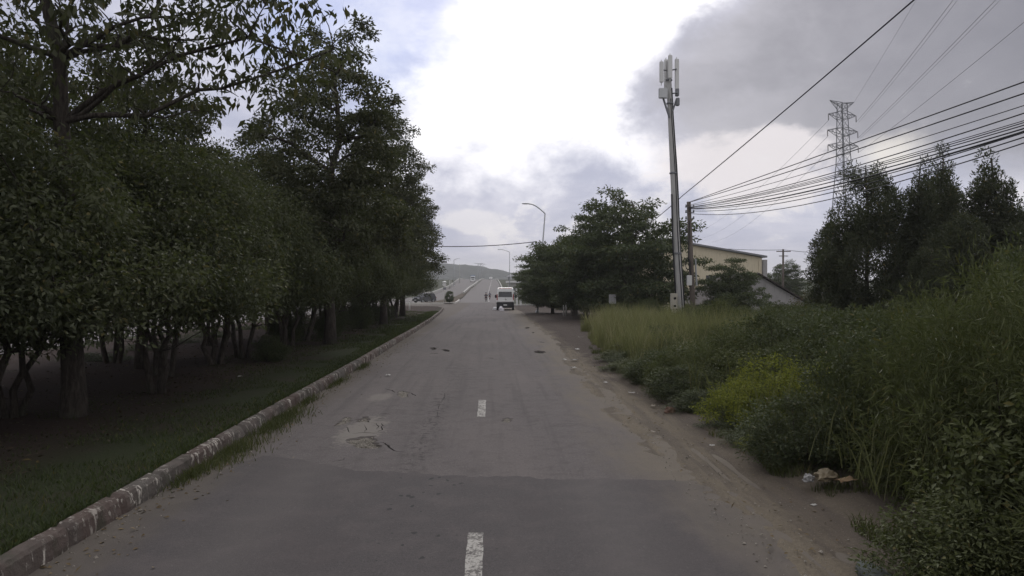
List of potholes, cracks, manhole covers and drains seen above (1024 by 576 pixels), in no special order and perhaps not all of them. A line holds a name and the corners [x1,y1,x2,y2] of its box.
pothole [345,436,382,448]
